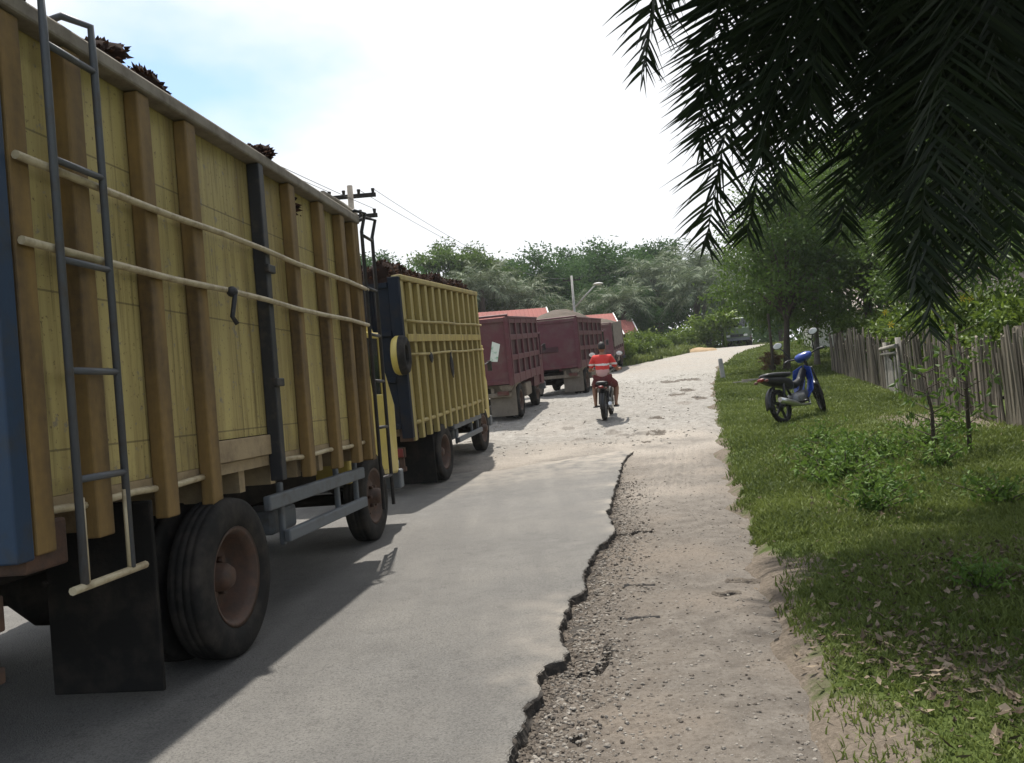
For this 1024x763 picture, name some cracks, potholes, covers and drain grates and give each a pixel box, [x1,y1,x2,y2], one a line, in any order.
pothole [564,730,596,748]
crack [506,452,660,763]
